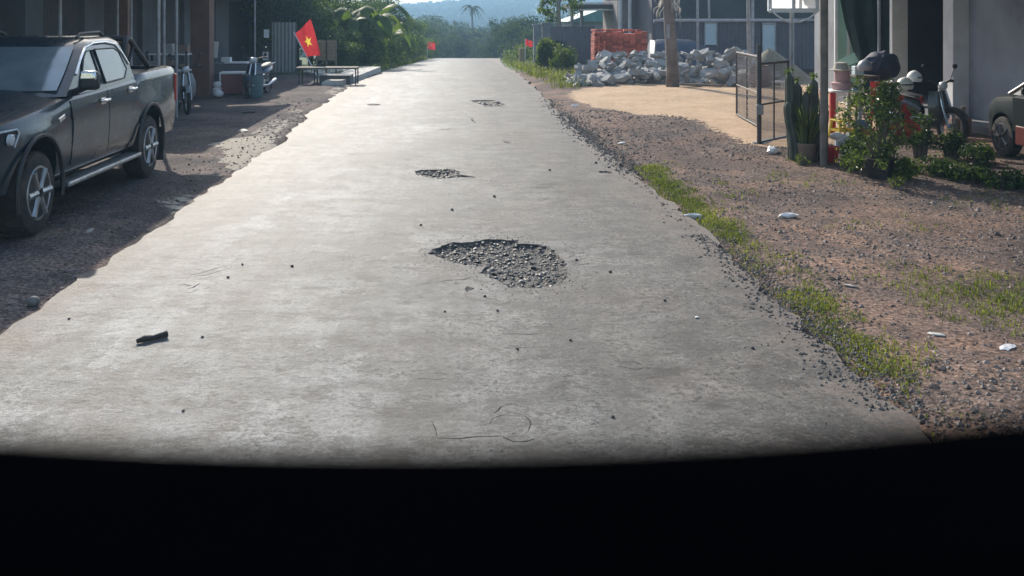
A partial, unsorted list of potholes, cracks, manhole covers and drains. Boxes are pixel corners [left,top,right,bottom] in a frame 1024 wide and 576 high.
pothole [414,169,473,179]
pothole [427,239,569,289]
crack [433,404,533,442]
